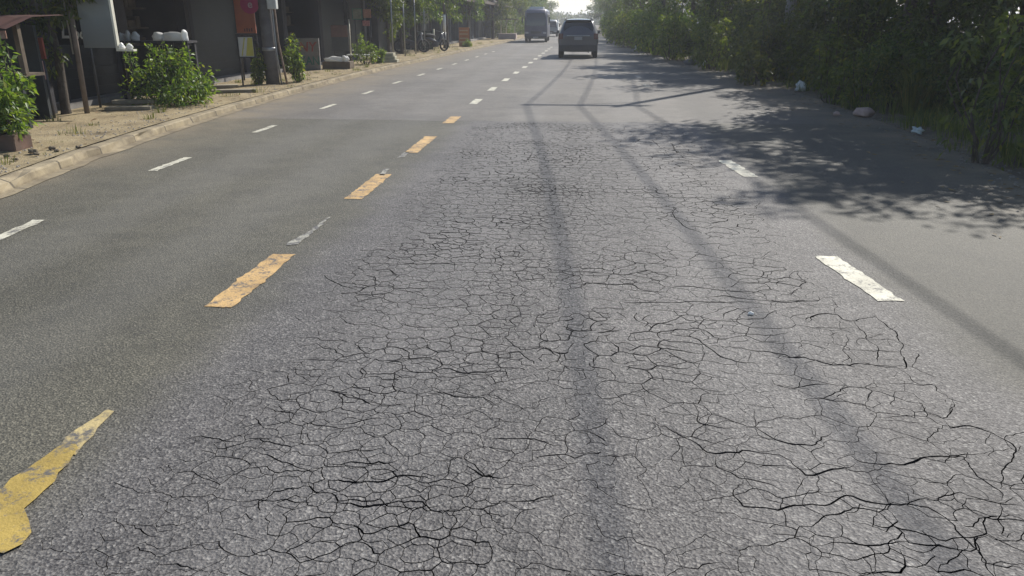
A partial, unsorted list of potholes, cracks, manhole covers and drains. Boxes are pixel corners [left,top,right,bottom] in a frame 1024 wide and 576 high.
crack [3,122,1024,576]
